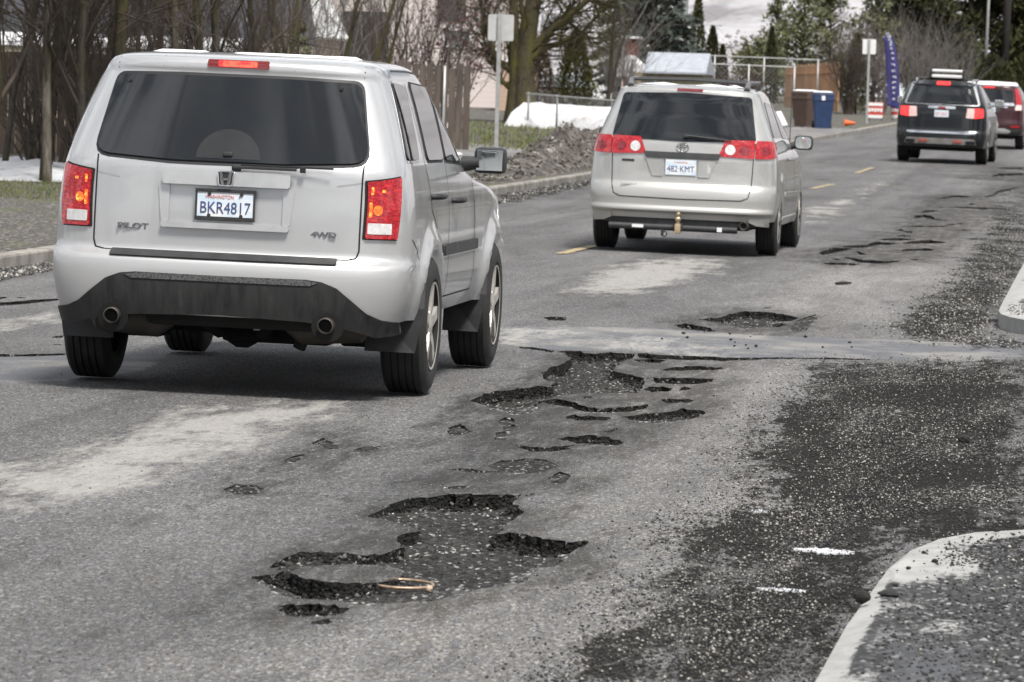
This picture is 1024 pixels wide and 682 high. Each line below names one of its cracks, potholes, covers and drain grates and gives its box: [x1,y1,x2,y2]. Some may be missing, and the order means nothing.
pothole [676,323,714,333]
pothole [624,408,706,424]
pothole [653,377,713,385]
pothole [447,423,472,436]
pothole [252,493,589,606]
pothole [494,417,517,442]
crack [0,297,58,306]
pothole [470,351,649,415]
pothole [224,484,265,495]
crack [0,336,65,357]
pothole [278,603,350,617]
pothole [698,311,798,329]
